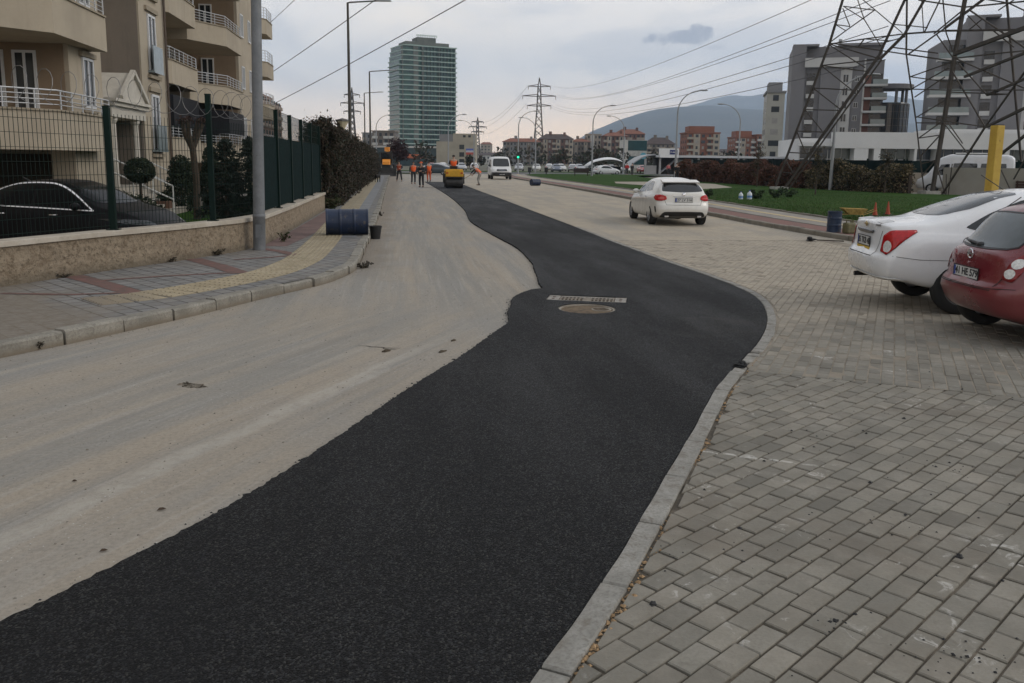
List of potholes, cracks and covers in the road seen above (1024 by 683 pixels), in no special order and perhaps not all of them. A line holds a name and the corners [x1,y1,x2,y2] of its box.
drain grate [547,295,627,303]
manhole cover [558,304,615,313]
